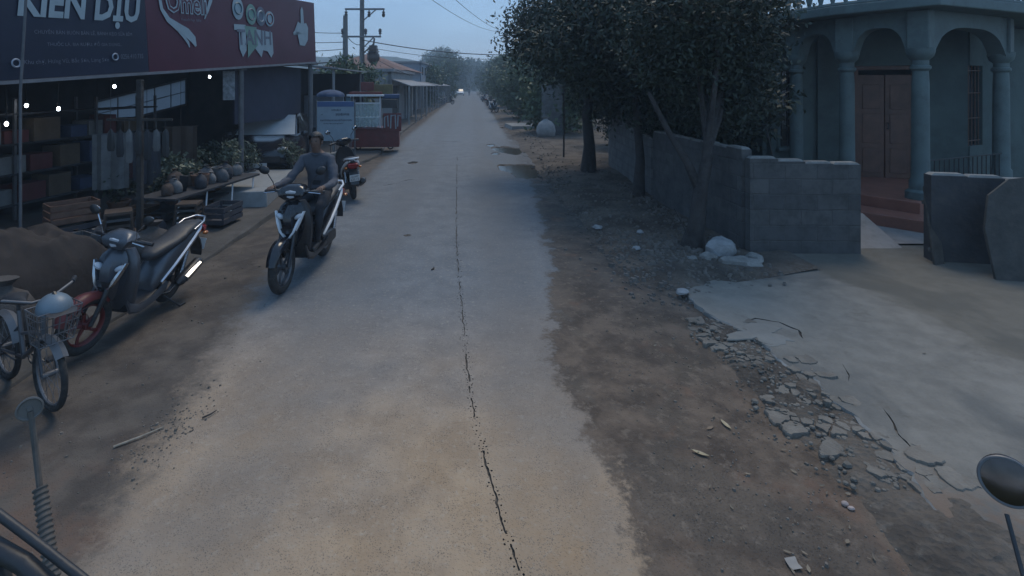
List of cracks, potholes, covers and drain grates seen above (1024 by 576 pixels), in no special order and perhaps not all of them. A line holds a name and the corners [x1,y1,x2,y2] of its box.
crack [454,159,525,576]
pothole [491,146,522,155]
pothole [497,164,542,179]
crack [685,316,1024,576]
